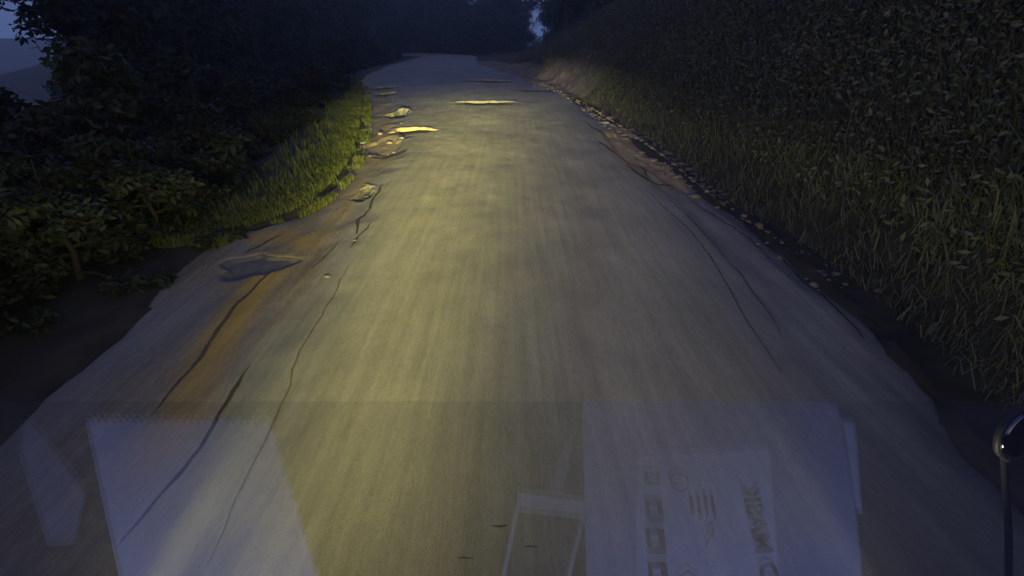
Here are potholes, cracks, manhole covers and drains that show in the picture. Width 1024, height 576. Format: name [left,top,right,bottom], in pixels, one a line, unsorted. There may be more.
pothole [351,187,373,202]
crack [584,121,864,372]
crack [118,186,382,565]
pothole [218,254,302,282]
pothole [385,109,409,119]
